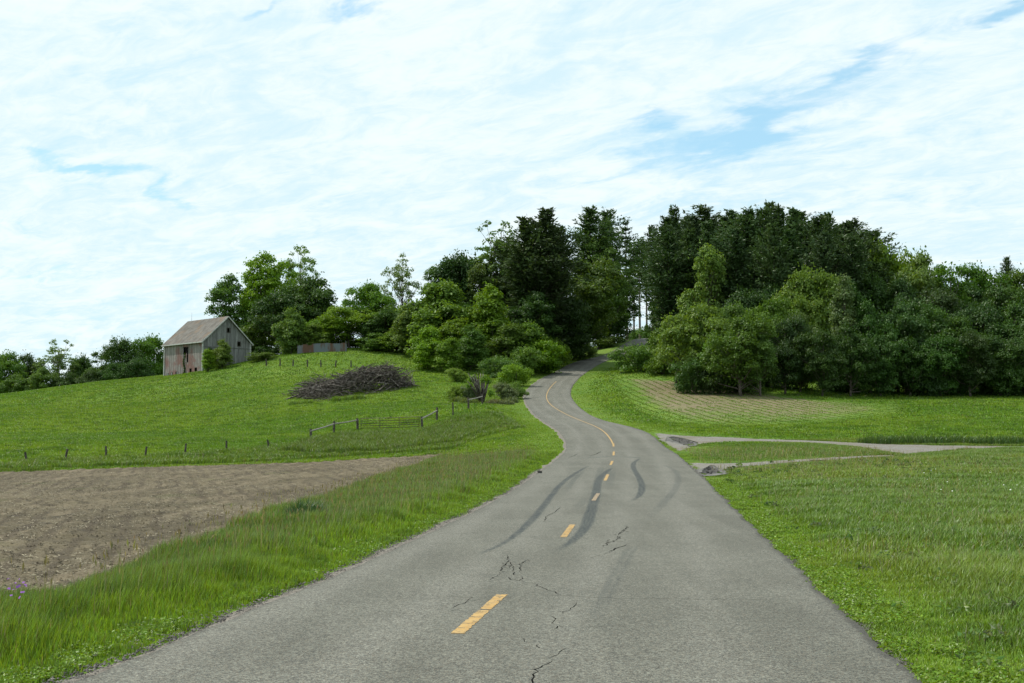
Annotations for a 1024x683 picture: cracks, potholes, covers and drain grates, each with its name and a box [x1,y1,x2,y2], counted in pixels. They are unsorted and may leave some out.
crack [449,555,760,683]
crack [591,526,628,558]
